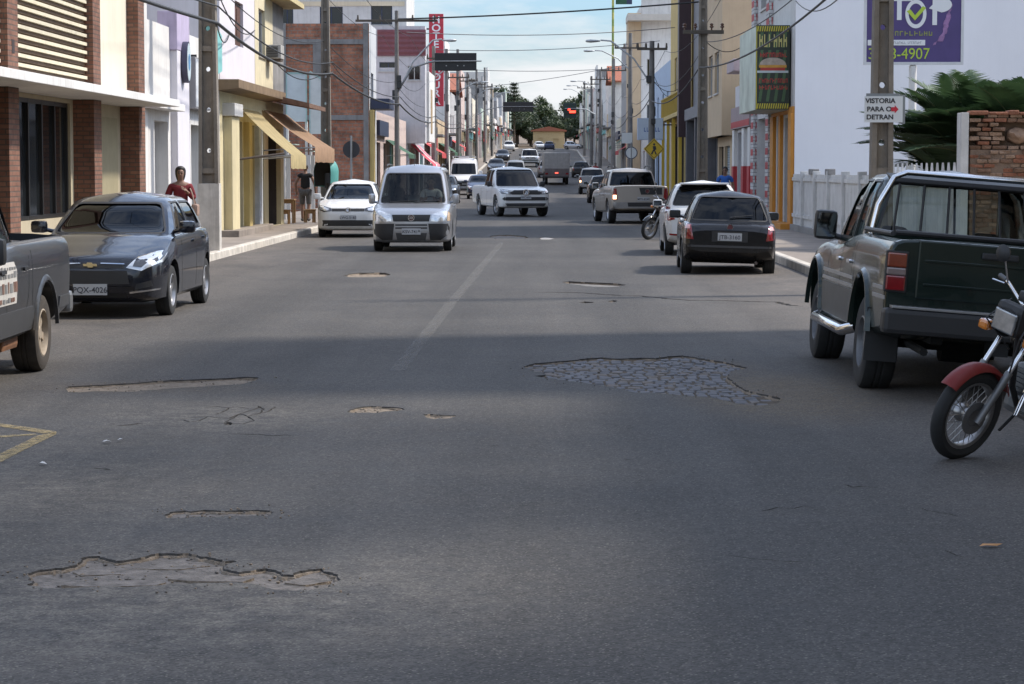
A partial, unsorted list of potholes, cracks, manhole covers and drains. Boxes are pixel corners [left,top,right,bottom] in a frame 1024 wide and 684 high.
pothole [142,504,295,521]
pothole [56,376,277,392]
pothole [510,355,782,405]
crack [183,406,282,436]
pothole [1,548,361,596]
